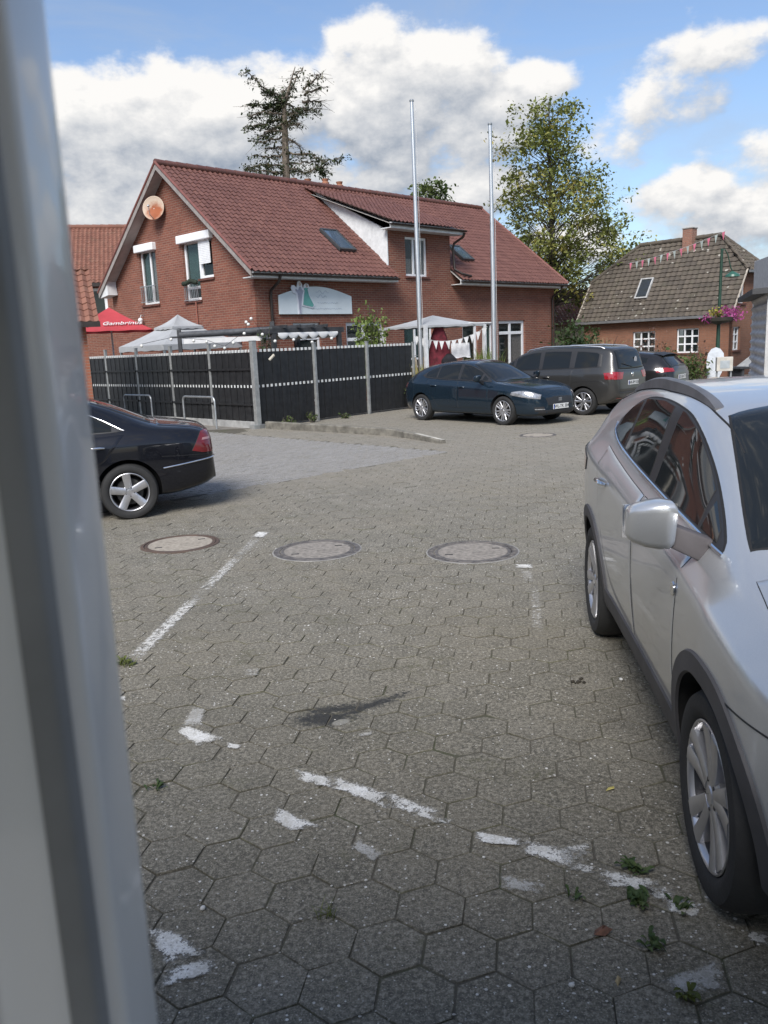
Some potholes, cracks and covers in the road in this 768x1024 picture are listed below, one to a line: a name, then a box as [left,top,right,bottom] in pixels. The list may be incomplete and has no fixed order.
manhole cover [140,534,220,554]
manhole cover [426,541,520,564]
manhole cover [272,540,362,562]
